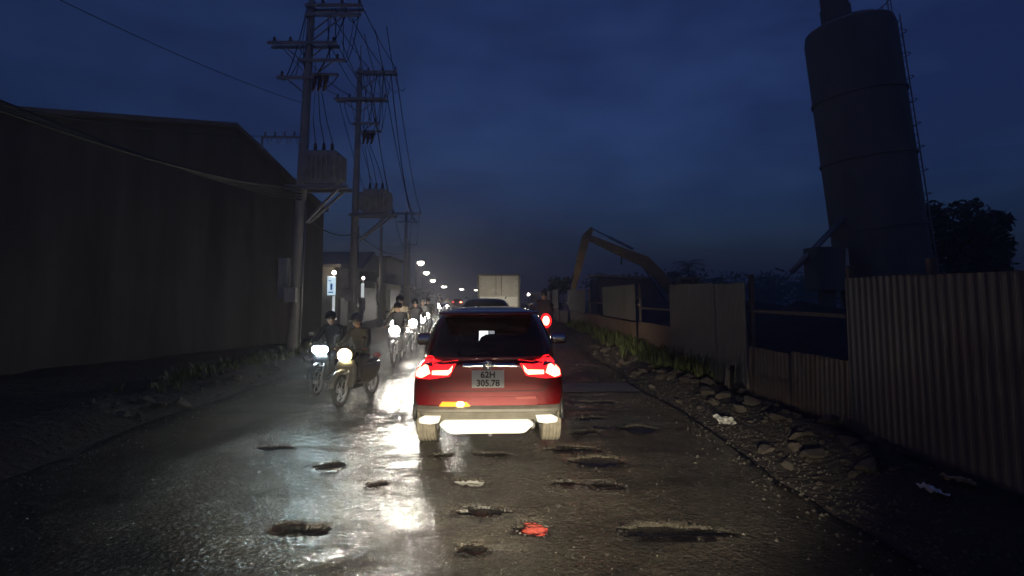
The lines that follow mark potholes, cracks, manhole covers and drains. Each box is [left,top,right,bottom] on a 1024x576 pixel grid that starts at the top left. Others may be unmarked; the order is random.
pothole [562,455,631,469]
pothole [542,444,600,452]
pothole [512,516,553,538]
pothole [454,541,492,558]
pothole [619,423,657,434]
pothole [548,478,580,486]
pothole [585,479,628,490]
pothole [262,519,333,541]
pothole [451,477,490,487]
pothole [567,428,603,436]
pothole [617,521,741,538]
pothole [433,502,520,520]
